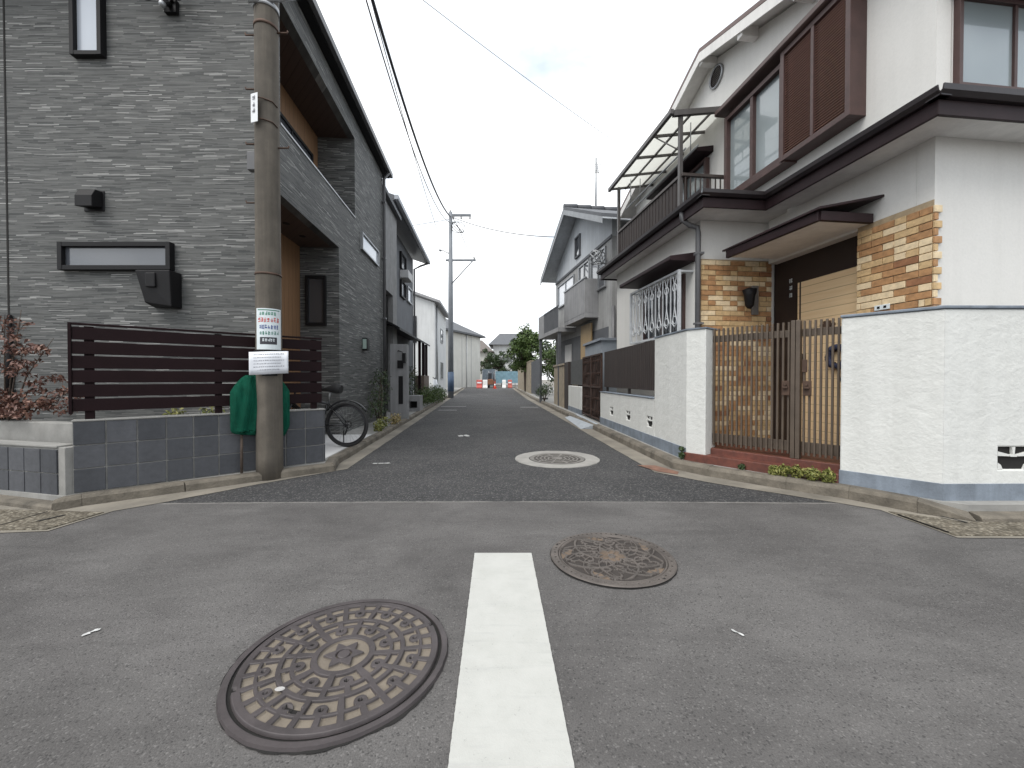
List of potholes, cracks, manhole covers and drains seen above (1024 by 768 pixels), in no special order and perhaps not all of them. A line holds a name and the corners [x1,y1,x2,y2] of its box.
manhole cover [216,599,448,755]
manhole cover [515,451,600,468]
manhole cover [550,532,678,589]
